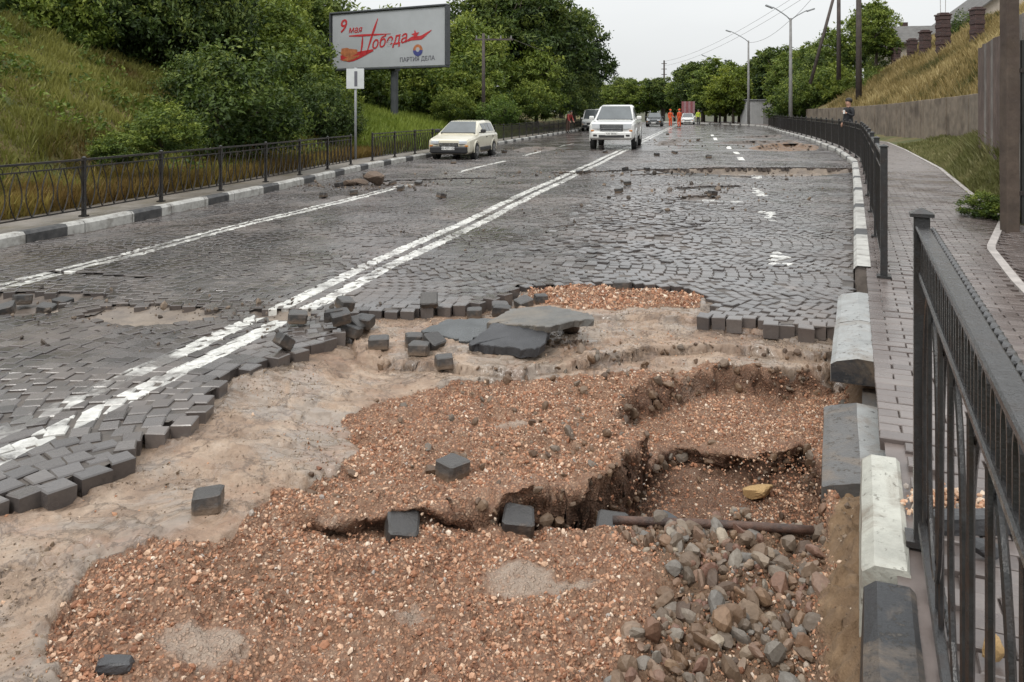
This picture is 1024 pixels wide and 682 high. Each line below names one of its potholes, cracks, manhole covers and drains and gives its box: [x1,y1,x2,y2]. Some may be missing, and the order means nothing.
pothole [0,284,875,682]
pothole [638,168,852,178]
pothole [749,142,819,152]
